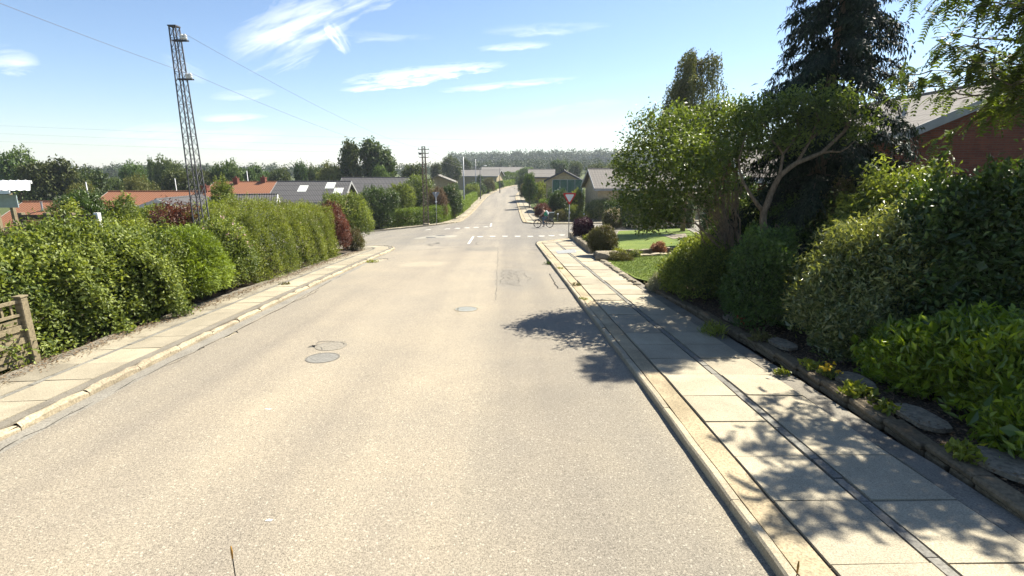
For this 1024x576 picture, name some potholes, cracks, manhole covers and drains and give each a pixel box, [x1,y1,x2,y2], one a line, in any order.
manhole cover [315,341,347,351]
manhole cover [305,353,340,363]
